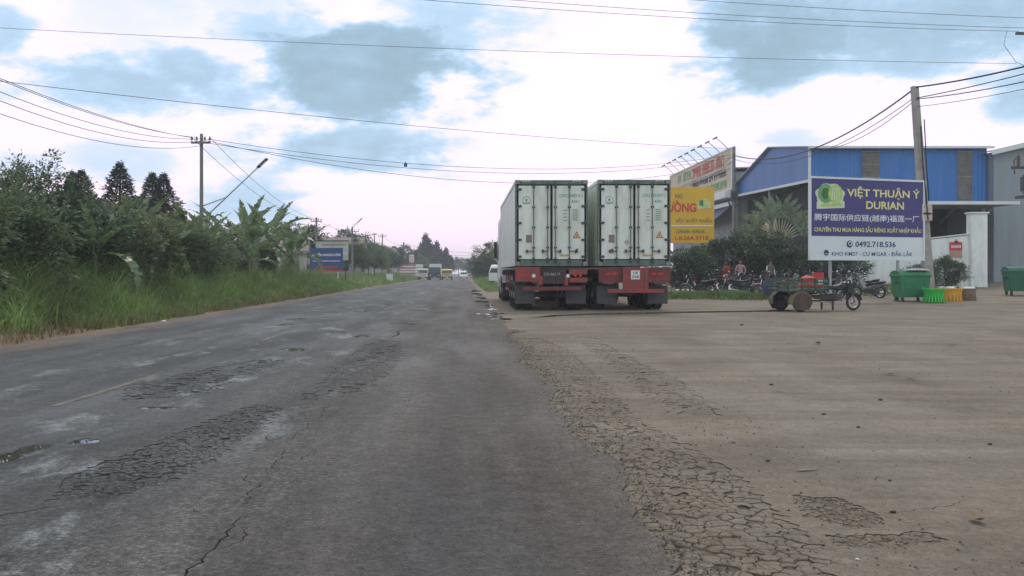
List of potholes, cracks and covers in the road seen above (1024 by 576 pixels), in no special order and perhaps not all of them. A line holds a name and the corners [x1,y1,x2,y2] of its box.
pothole [0,442,57,464]
crack [0,330,404,576]
crack [509,310,970,576]
